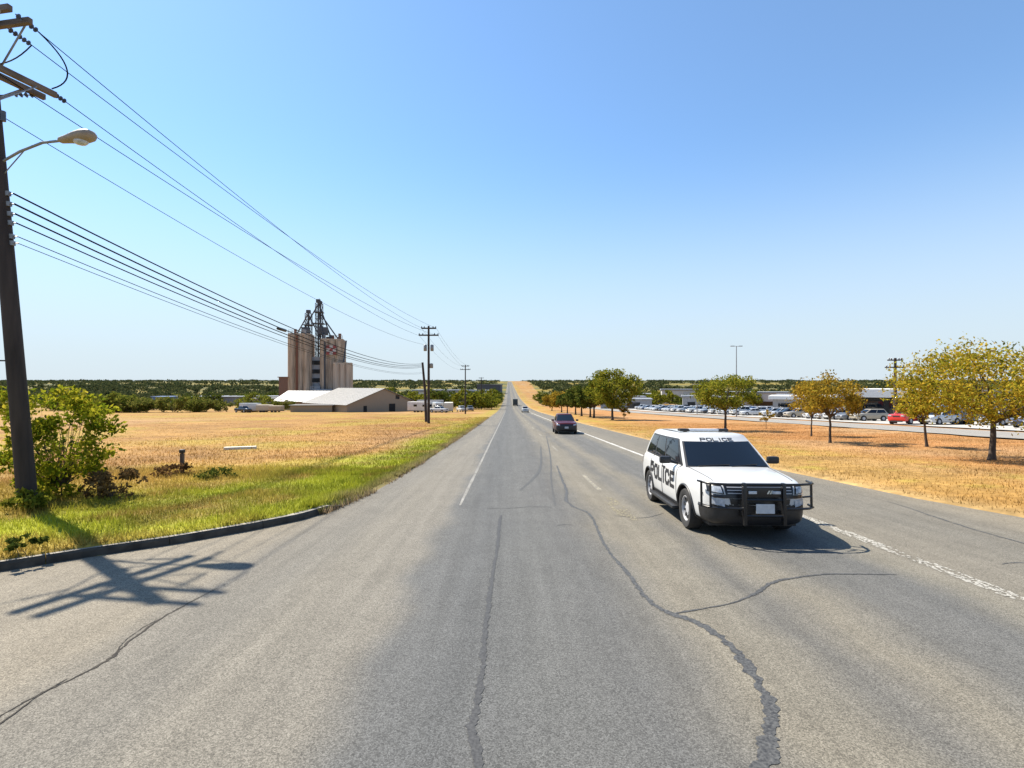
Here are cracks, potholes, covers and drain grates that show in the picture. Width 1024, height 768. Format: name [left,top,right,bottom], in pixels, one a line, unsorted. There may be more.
crack [0,588,217,724]
